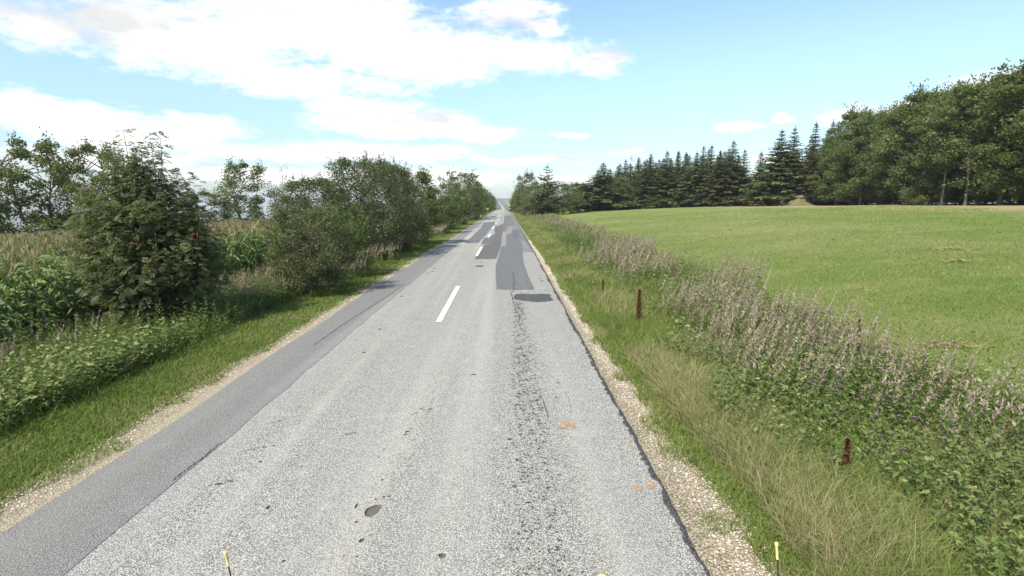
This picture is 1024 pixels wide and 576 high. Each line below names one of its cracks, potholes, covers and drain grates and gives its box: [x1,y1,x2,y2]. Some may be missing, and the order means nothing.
crack [503,272,584,576]
pothole [365,505,381,517]
